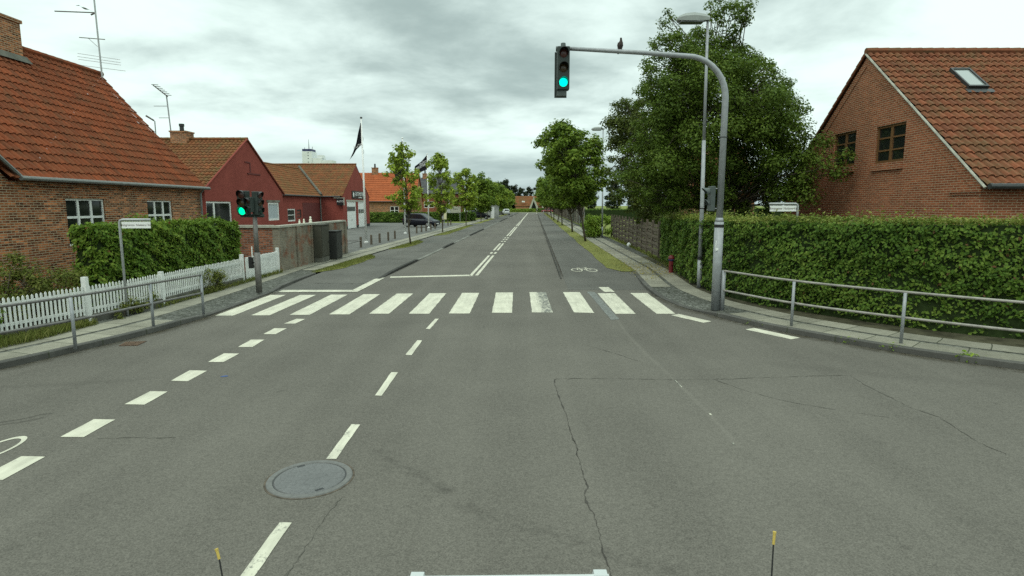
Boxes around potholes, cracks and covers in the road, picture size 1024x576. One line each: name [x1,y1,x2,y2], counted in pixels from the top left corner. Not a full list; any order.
manhole cover [263,460,355,499]
crack [554,375,1006,576]
crack [284,497,342,576]
